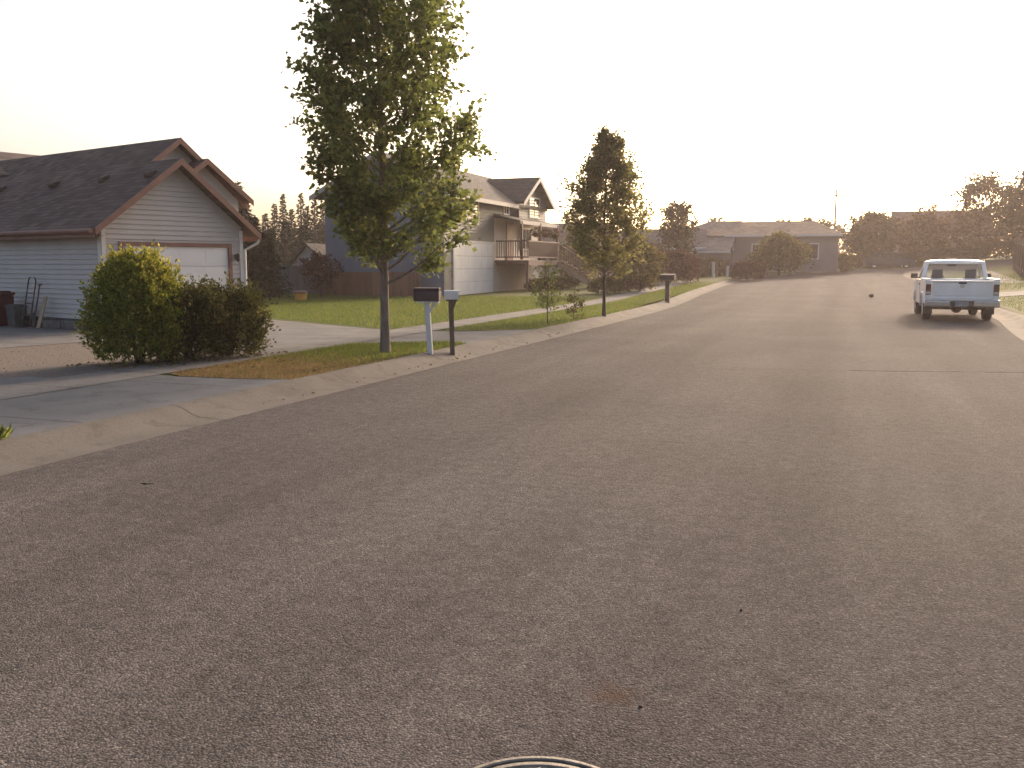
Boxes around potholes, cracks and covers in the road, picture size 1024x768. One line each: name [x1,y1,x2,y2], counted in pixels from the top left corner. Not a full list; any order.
manhole cover [473,756,599,768]
